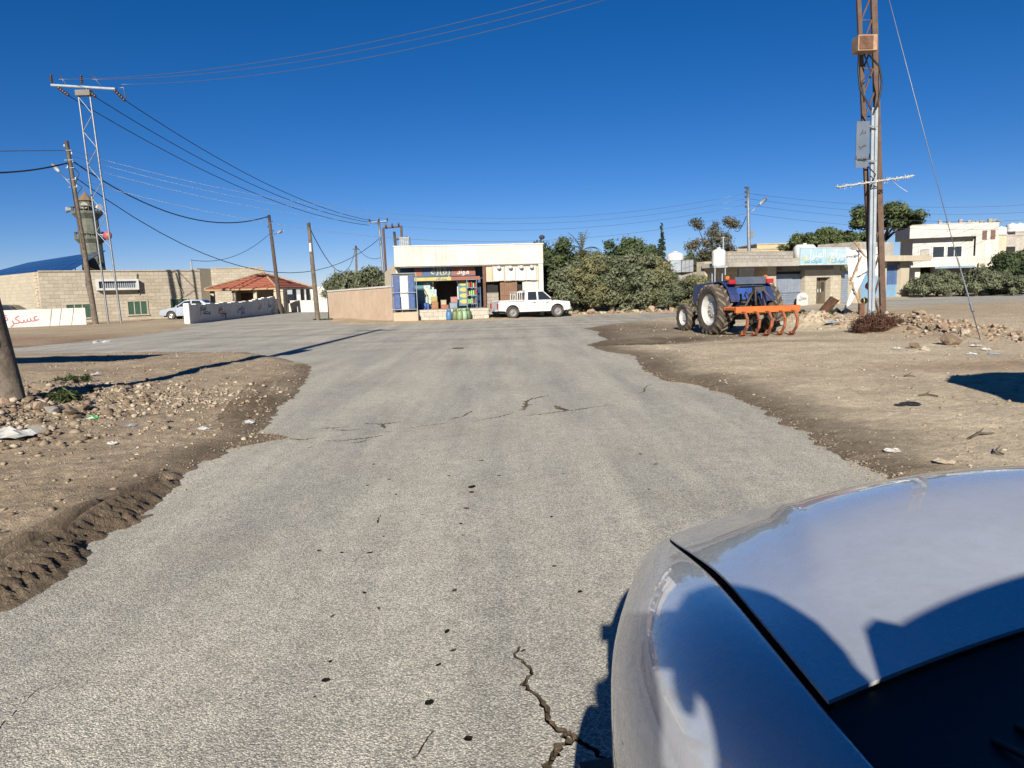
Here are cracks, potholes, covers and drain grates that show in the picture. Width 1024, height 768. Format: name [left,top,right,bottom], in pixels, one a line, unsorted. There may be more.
crack [294,396,608,448]
crack [513,646,607,768]
crack [413,730,435,758]
